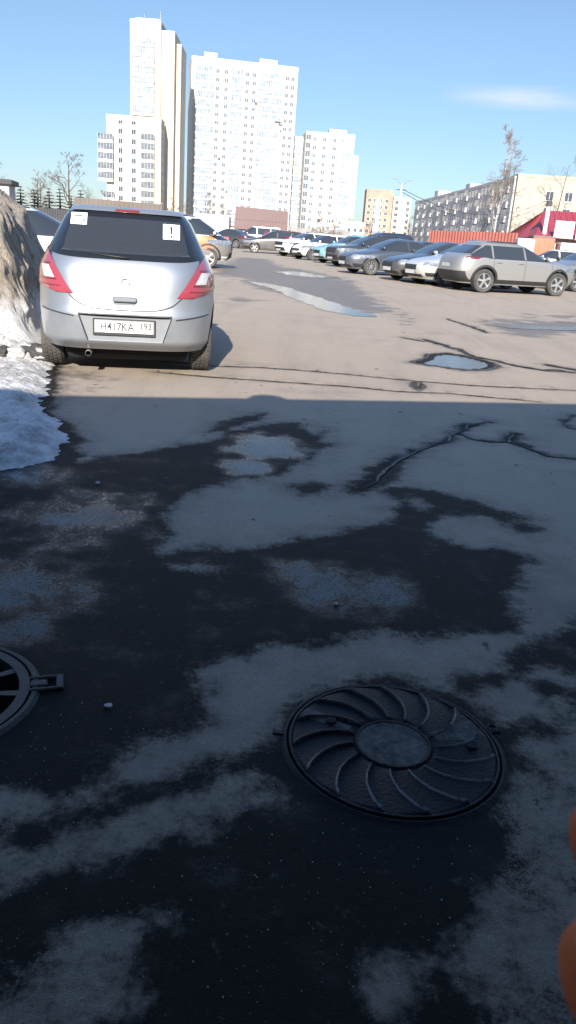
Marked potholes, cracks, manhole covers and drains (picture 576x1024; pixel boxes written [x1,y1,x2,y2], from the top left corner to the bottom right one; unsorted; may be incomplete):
crack [359,421,575,490]
manhole cover [272,684,508,827]
pothole [409,381,427,391]
pothole [410,352,499,371]
crack [156,319,576,402]
manhole cover [0,647,64,735]
